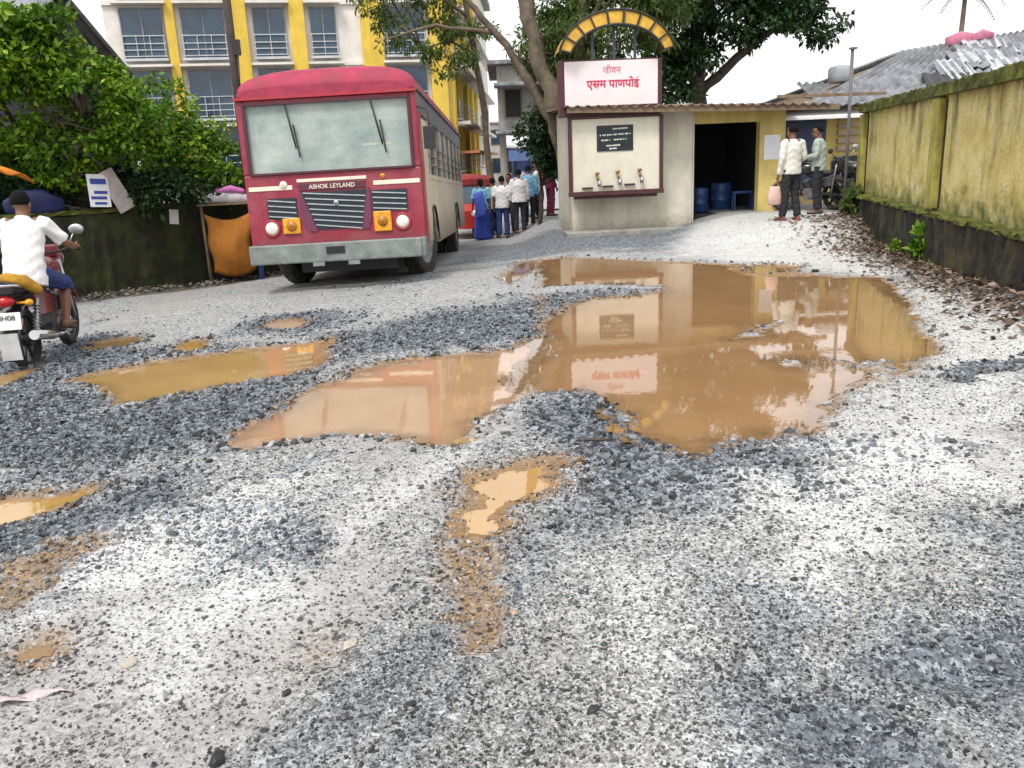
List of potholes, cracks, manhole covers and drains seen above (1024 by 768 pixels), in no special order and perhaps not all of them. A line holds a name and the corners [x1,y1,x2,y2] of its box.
pothole [56,334,350,407]
pothole [431,447,594,574]
pothole [248,313,325,331]
pothole [433,550,517,655]
pothole [0,532,108,610]
pothole [0,619,104,681]
pothole [0,471,123,529]
pothole [208,328,558,453]
pothole [493,254,952,460]
